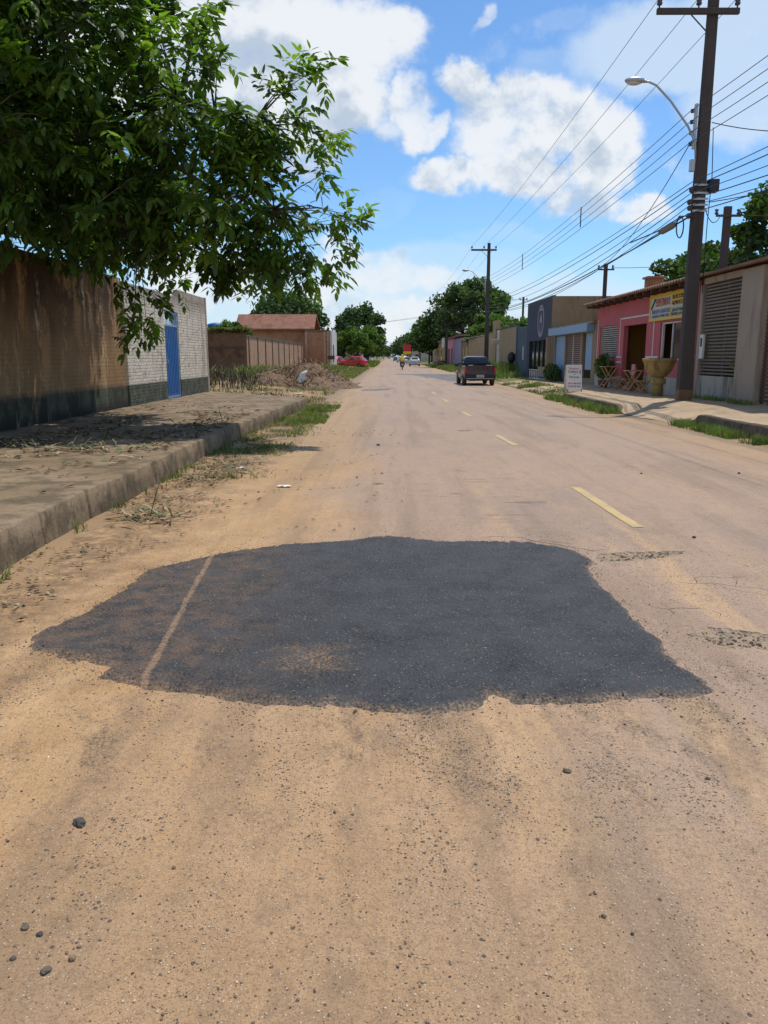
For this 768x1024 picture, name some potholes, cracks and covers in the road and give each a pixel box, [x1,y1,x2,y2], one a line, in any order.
pothole [594,551,693,562]
pothole [686,627,768,650]
